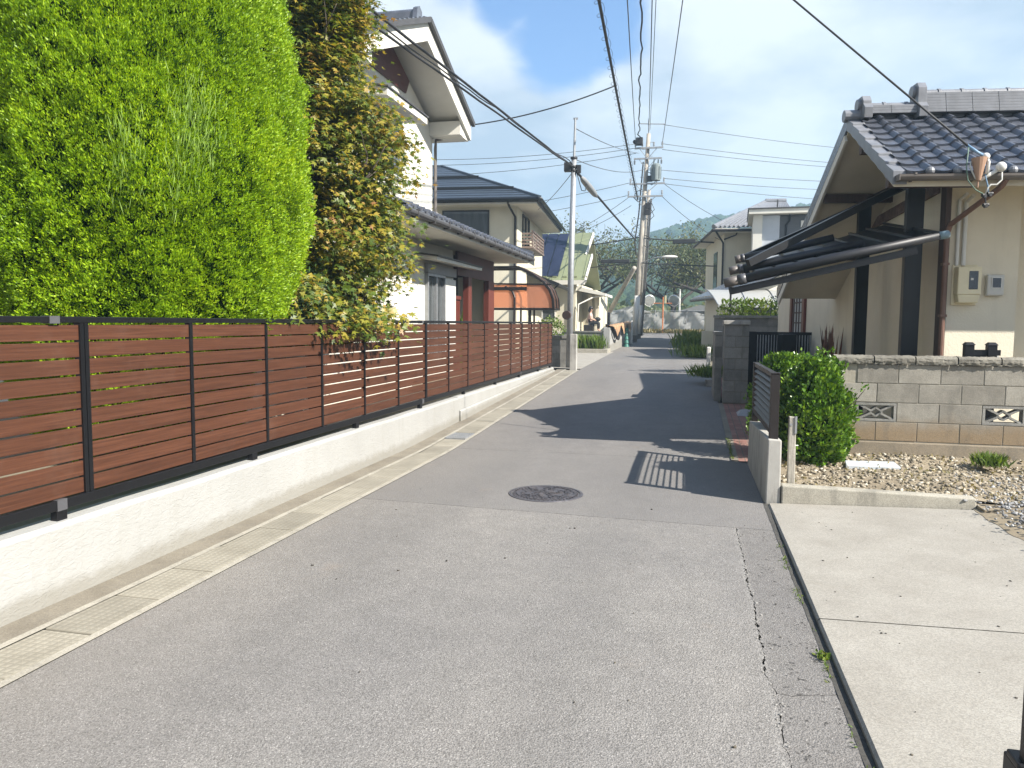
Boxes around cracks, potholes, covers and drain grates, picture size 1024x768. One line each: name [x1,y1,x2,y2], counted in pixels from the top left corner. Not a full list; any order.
drain grate [445,432,475,440]
manhole cover [508,485,583,502]
crack [734,527,832,757]
